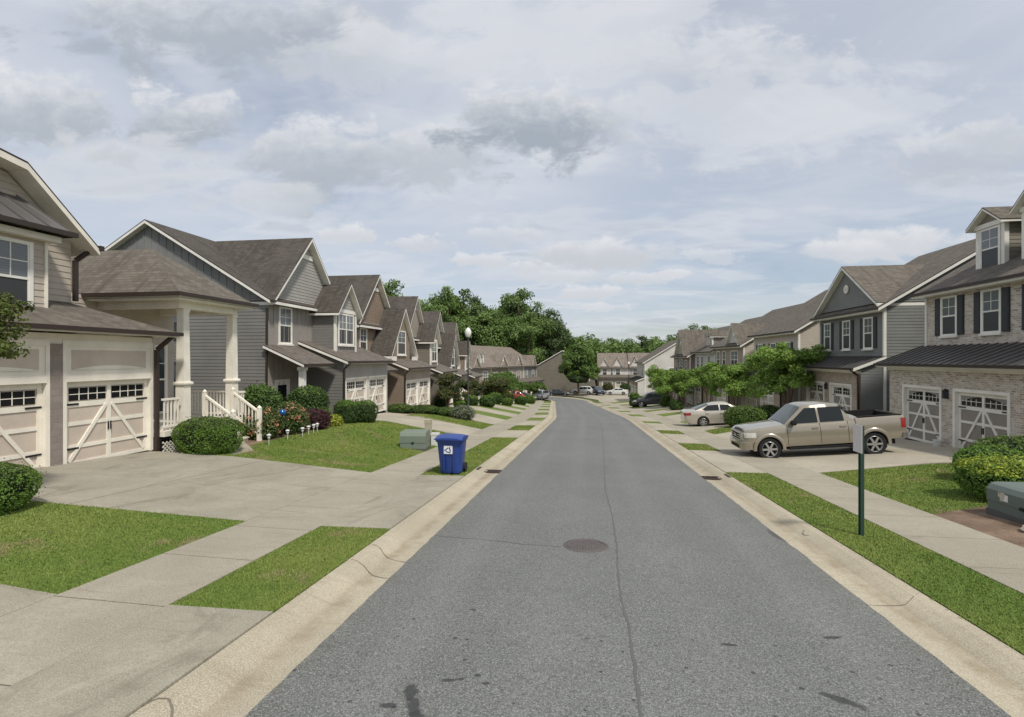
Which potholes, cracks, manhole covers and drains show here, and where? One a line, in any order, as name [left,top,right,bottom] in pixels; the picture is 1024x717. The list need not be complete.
crack [600,423,643,717]
manhole cover [563,538,609,553]
